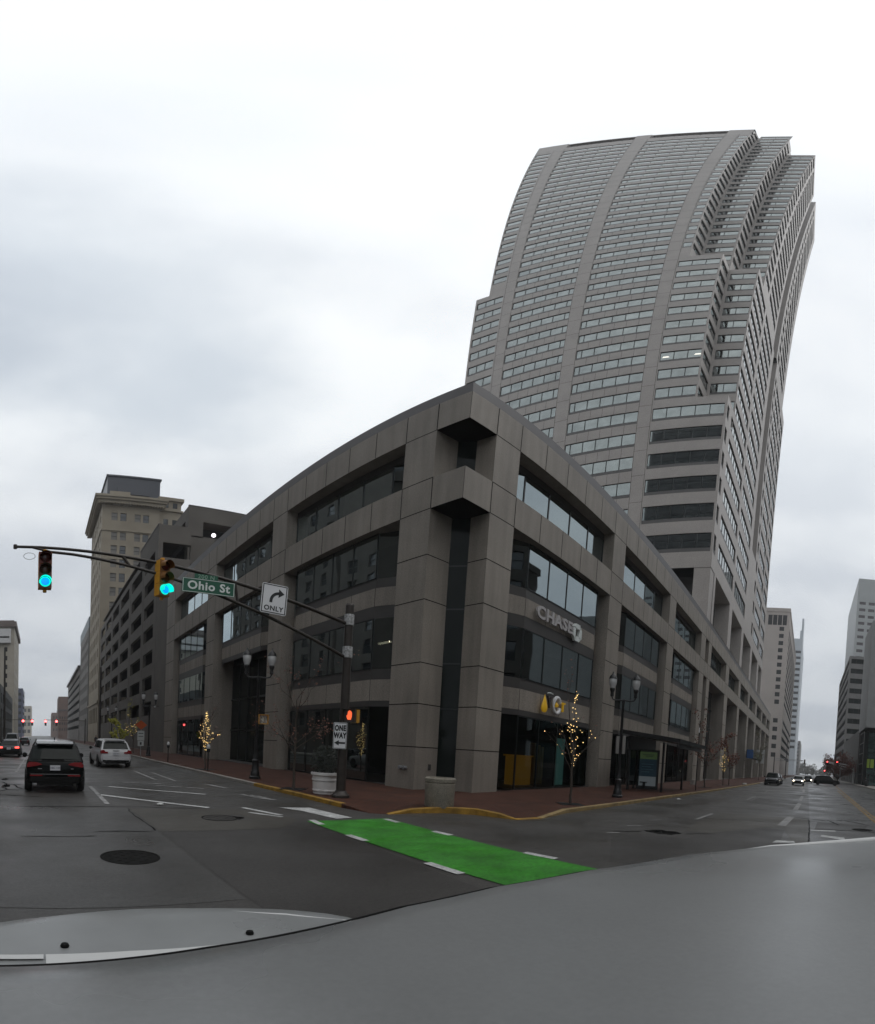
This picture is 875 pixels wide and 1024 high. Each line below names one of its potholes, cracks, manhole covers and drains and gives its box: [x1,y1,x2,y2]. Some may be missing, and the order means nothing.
crack [75,806,165,832]
manhole cover [100,850,160,865]
